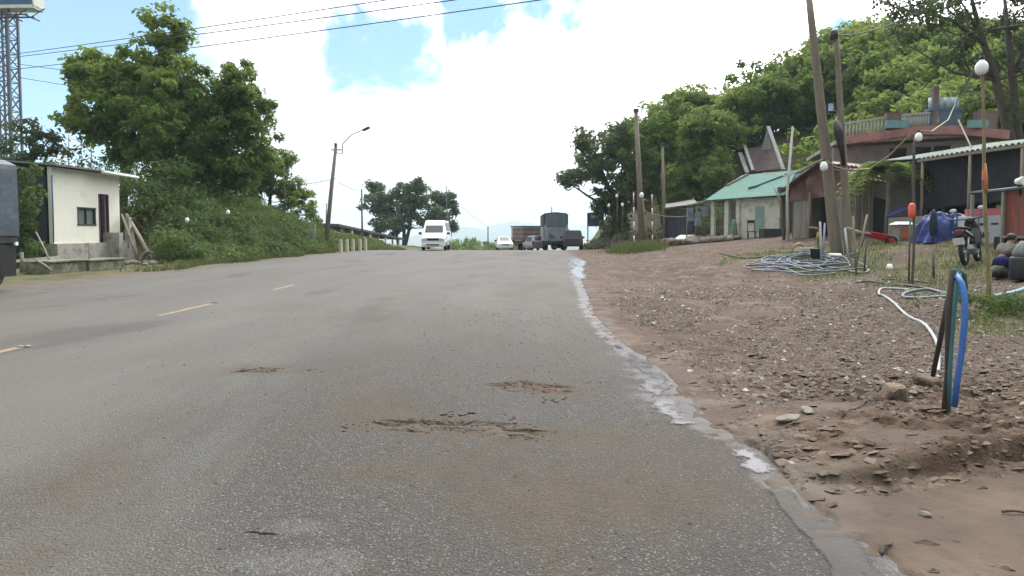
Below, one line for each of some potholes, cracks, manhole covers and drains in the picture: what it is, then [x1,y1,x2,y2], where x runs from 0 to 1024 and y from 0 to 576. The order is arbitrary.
pothole [343,418,578,442]
pothole [473,380,597,396]
